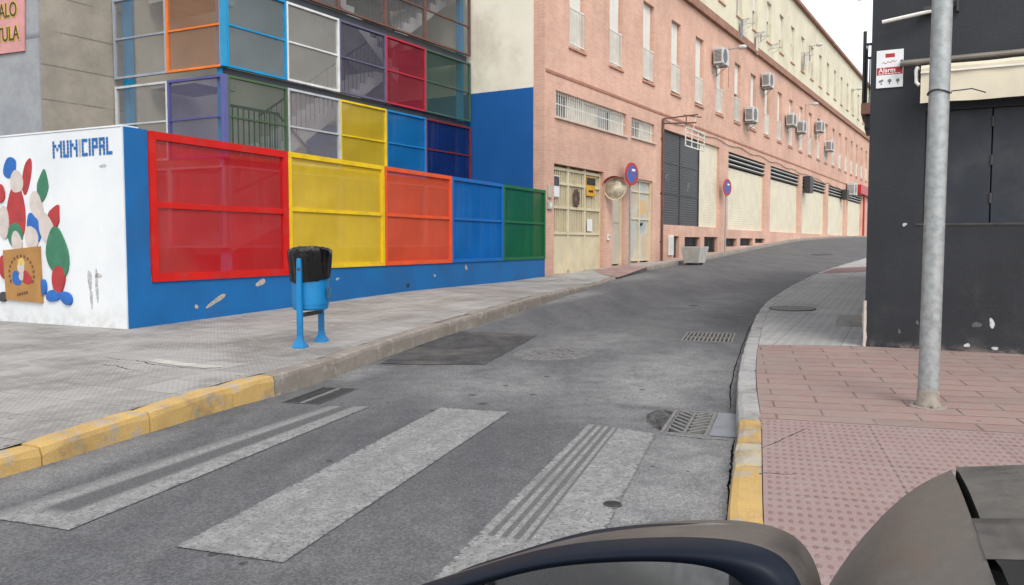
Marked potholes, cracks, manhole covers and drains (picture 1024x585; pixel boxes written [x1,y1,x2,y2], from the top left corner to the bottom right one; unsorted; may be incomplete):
crack [729,323,753,411]
pothole [646,410,673,430]
drain grate [660,410,717,436]
crack [103,357,199,370]
drain grate [281,387,356,405]
drain grate [681,331,736,342]
utility cover [603,500,622,508]
